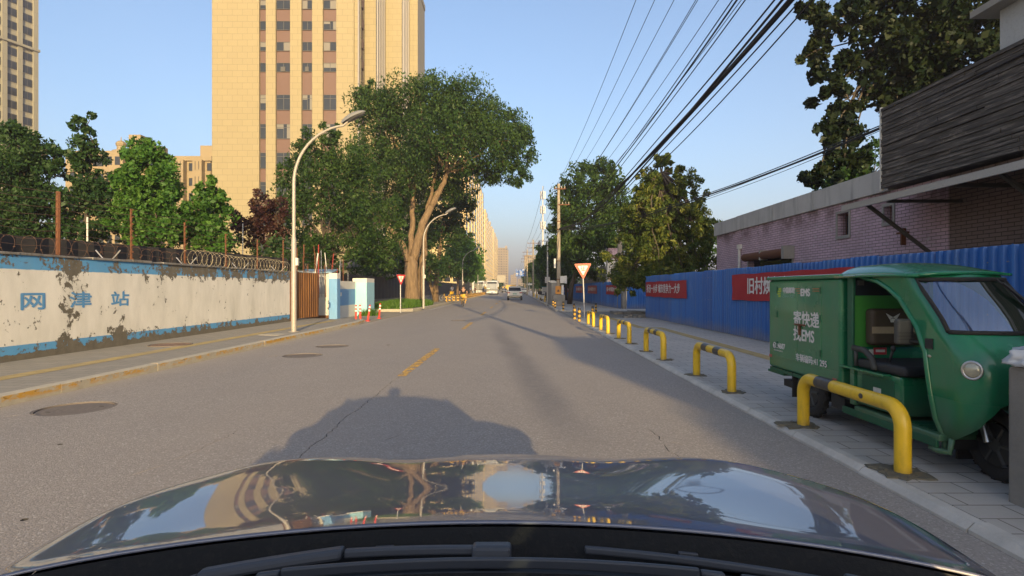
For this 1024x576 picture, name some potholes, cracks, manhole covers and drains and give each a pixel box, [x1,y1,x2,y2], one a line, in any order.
manhole cover [30,401,118,416]
